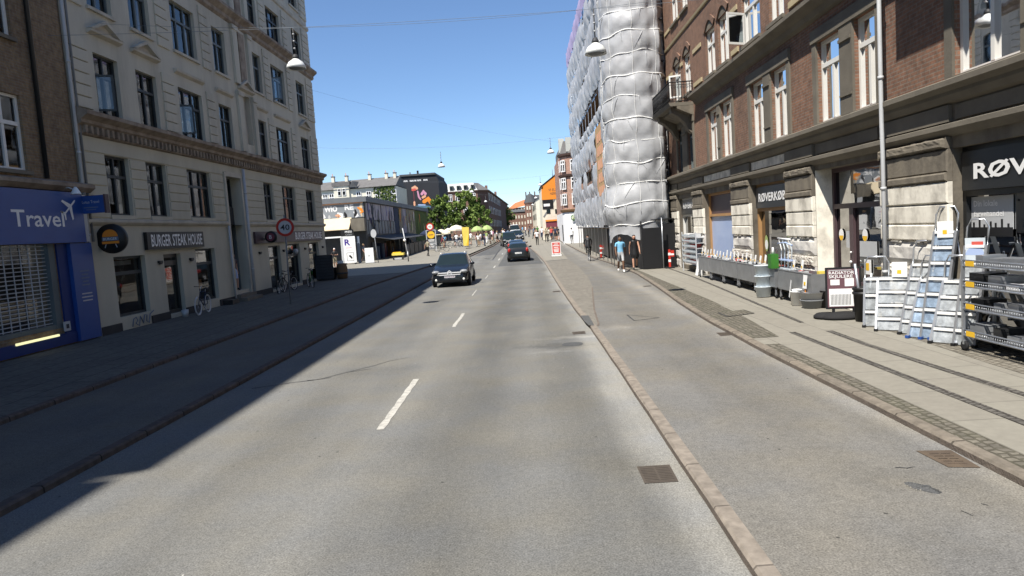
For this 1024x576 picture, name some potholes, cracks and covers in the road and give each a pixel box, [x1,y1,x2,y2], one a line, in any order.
drain grate [637,465,678,483]
drain grate [918,450,981,468]
crack [251,357,408,389]
